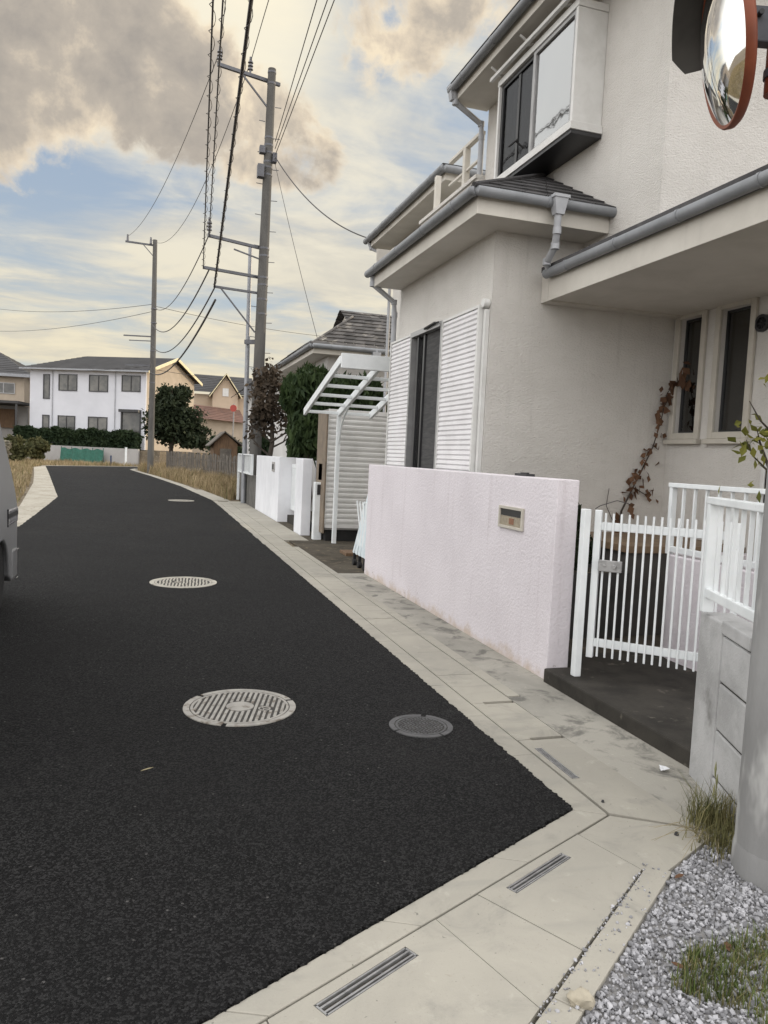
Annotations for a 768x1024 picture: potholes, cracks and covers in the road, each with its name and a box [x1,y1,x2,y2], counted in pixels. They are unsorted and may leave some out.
drain grate [535,748,579,779]
drain grate [315,947,418,1016]
manhole cover [149,577,217,588]
manhole cover [389,714,453,738]
drain grate [507,853,571,893]
manhole cover [183,689,296,727]
